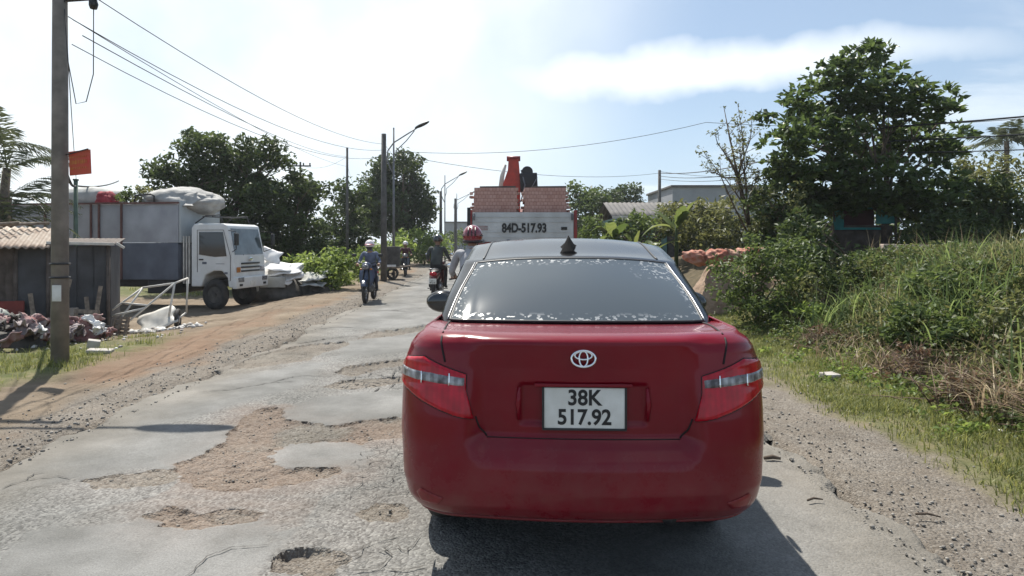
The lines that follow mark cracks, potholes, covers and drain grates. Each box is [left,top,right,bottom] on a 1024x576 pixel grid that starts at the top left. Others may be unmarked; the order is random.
crack [332,438,409,497]
crack [187,544,267,575]
pothole [142,506,266,530]
pothole [323,377,403,390]
pothole [270,547,353,576]
pothole [355,503,410,523]
pothole [82,469,182,490]
pothole [174,407,402,492]
crack [346,533,425,576]
pothole [335,359,404,377]
